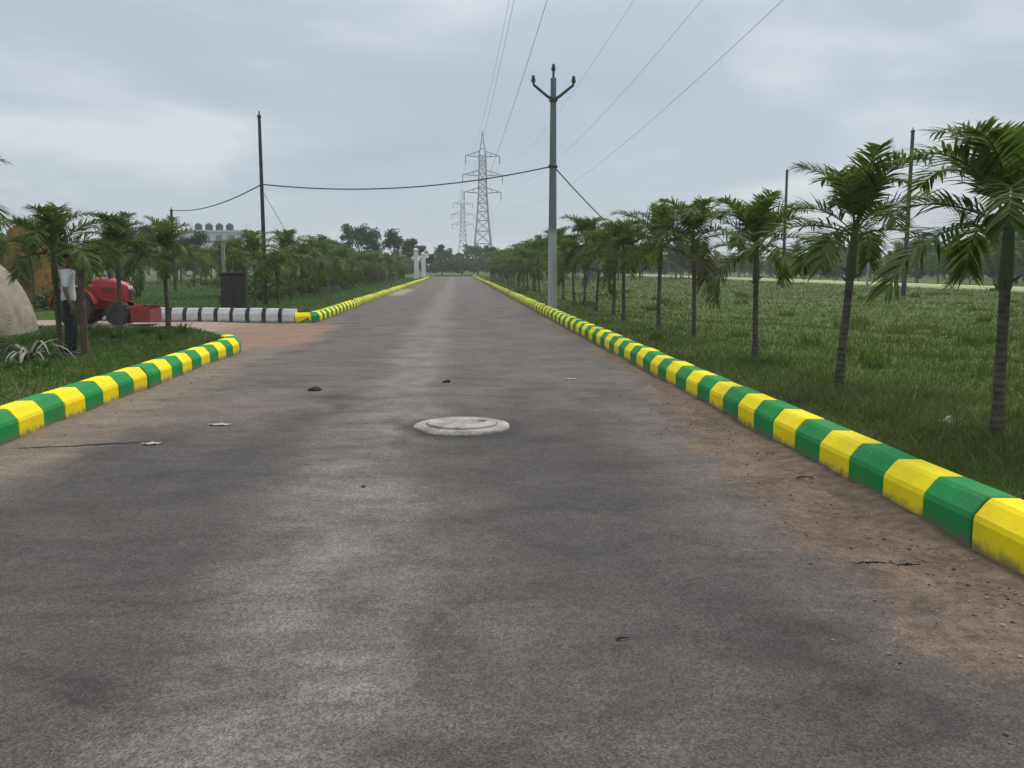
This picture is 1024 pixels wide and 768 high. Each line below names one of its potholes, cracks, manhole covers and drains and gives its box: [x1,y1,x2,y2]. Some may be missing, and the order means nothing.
manhole cover [413,417,510,437]
crack [9,441,150,449]
